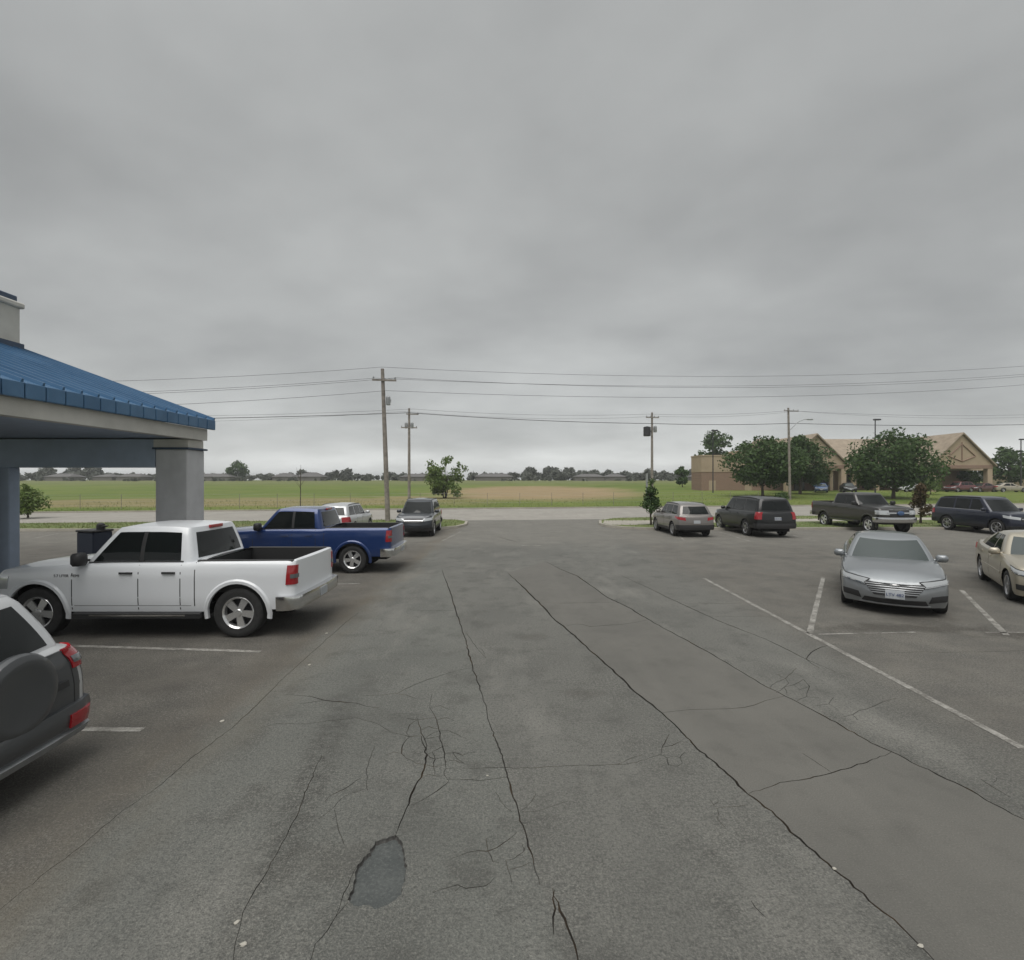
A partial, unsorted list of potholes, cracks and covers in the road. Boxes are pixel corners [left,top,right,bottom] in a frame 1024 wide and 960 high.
pothole [348,835,407,909]
crack [663,644,895,719]
crack [711,752,891,825]
crack [2,613,685,960]
